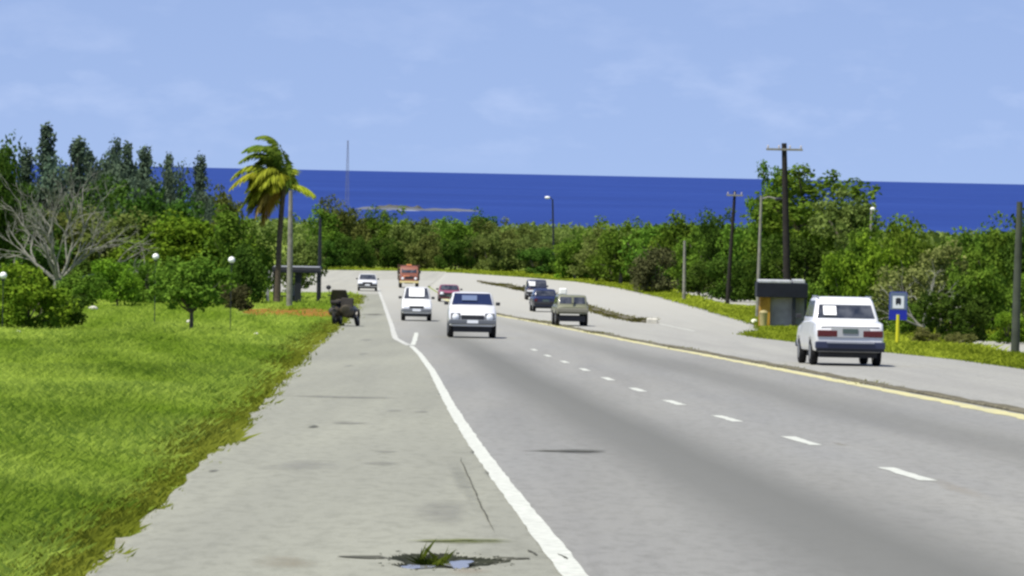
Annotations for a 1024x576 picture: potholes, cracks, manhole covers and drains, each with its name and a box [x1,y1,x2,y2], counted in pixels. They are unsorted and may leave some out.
crack [415,460,538,562]
pothole [389,553,510,569]
